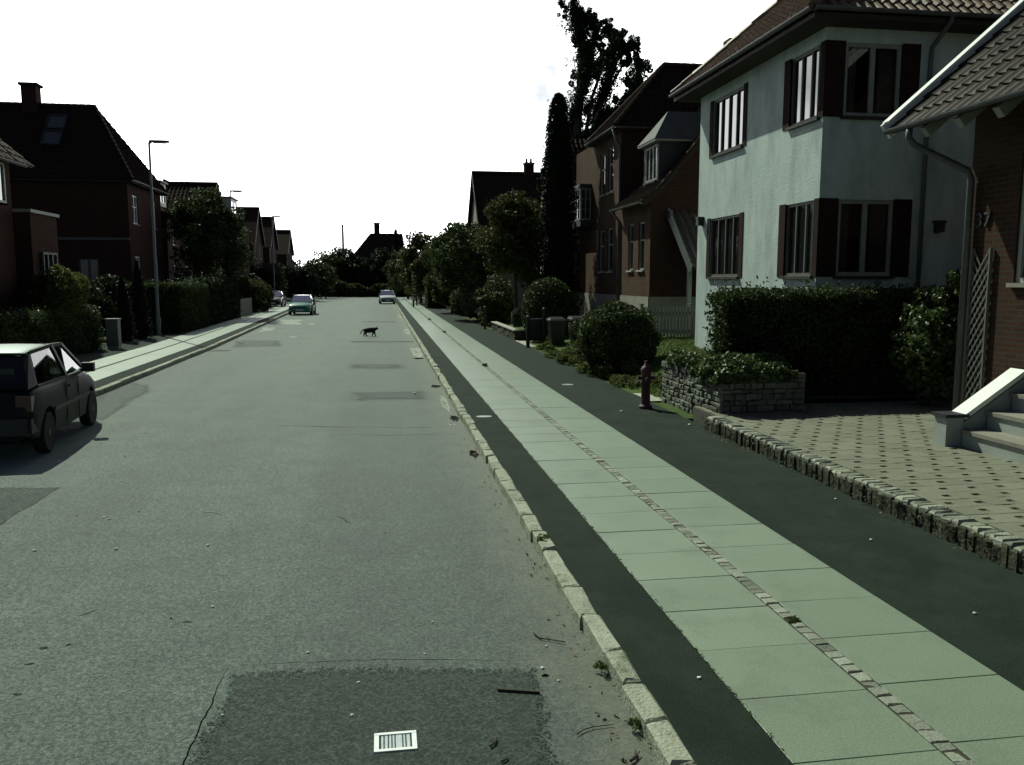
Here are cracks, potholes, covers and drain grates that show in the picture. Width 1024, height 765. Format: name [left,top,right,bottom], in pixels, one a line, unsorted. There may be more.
crack [182,667,229,765]
